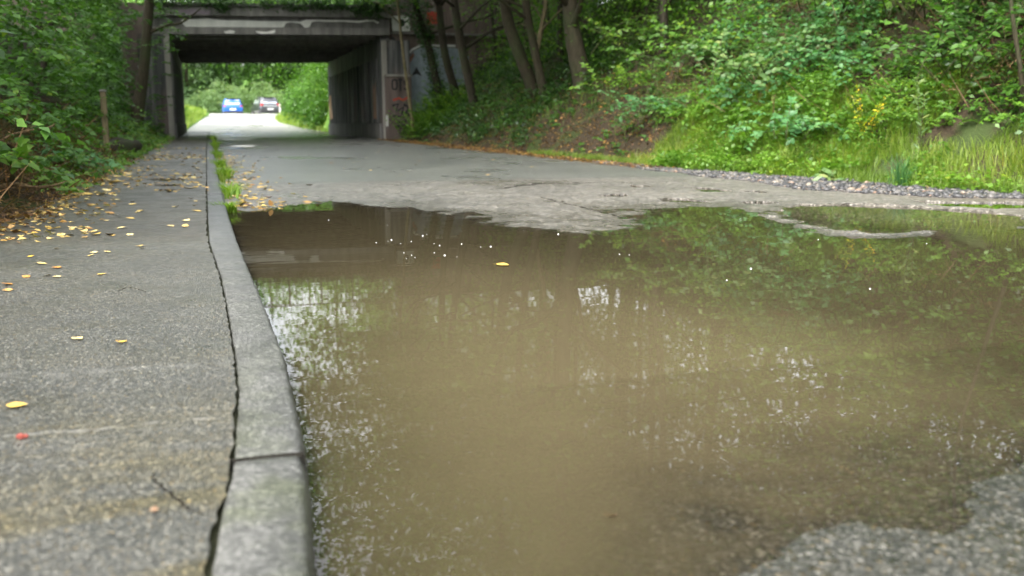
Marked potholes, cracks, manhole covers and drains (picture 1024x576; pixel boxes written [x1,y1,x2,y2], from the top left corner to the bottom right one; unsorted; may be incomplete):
pothole [772,203,1024,232]
crack [151,154,239,576]
